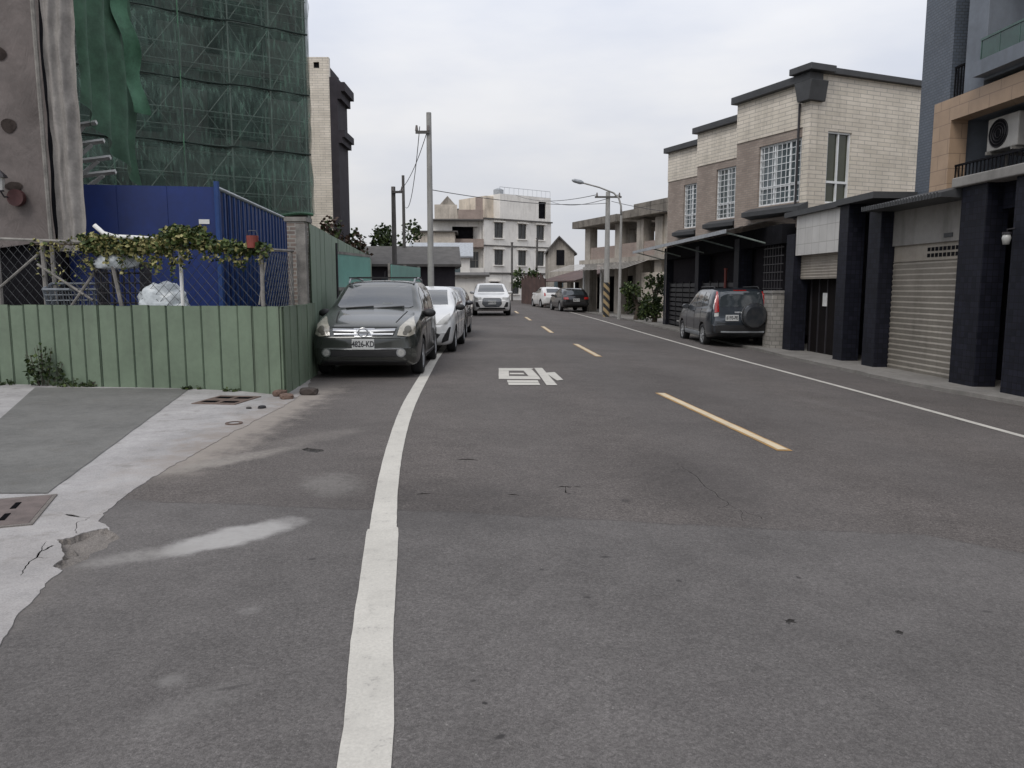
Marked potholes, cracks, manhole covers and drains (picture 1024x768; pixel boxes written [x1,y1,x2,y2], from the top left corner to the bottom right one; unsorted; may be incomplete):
pothole [53,529,120,569]
